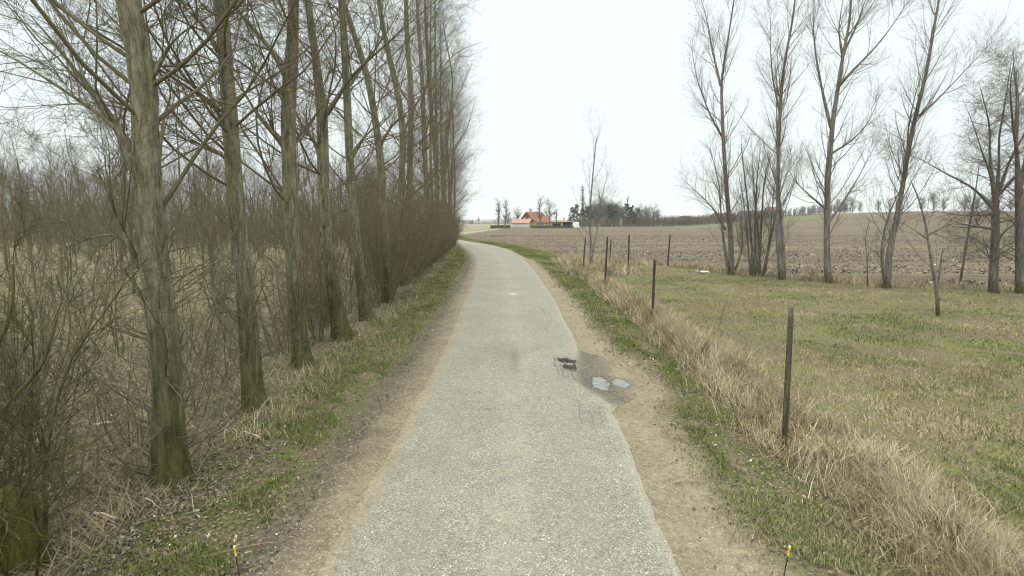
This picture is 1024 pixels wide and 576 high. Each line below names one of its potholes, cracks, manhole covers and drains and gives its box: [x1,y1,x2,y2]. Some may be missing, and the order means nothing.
pothole [605,375,633,390]
pothole [557,357,580,372]
pothole [590,375,612,393]
